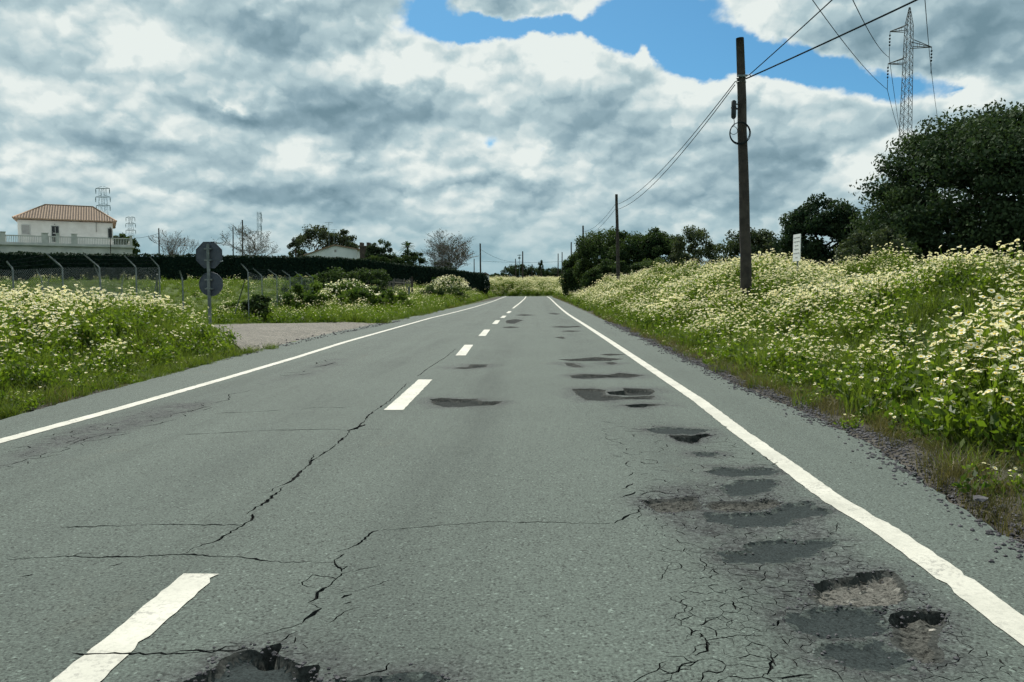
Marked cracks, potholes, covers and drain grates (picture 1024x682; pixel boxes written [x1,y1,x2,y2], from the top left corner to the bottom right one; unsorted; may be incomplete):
pothole [888,609,947,665]
crack [5,349,1019,682]
pothole [572,389,655,401]
pothole [807,570,911,607]
pothole [668,434,712,444]
pothole [183,643,321,682]
